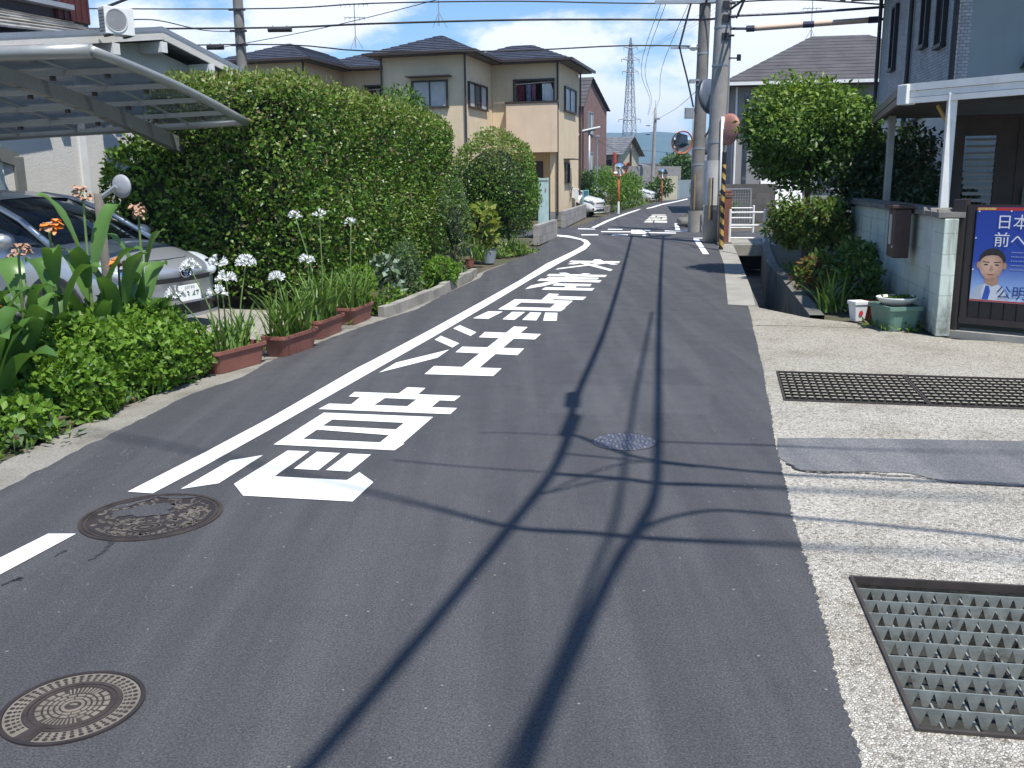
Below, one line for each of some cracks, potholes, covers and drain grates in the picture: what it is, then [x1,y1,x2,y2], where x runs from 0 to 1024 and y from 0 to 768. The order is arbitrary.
drain grate [776,371,930,406]
manhole cover [591,432,658,451]
crack [88,541,115,561]
manhole cover [0,671,146,747]
drain grate [849,575,1024,740]
drain grate [903,374,1024,410]
manhole cover [77,493,223,542]
